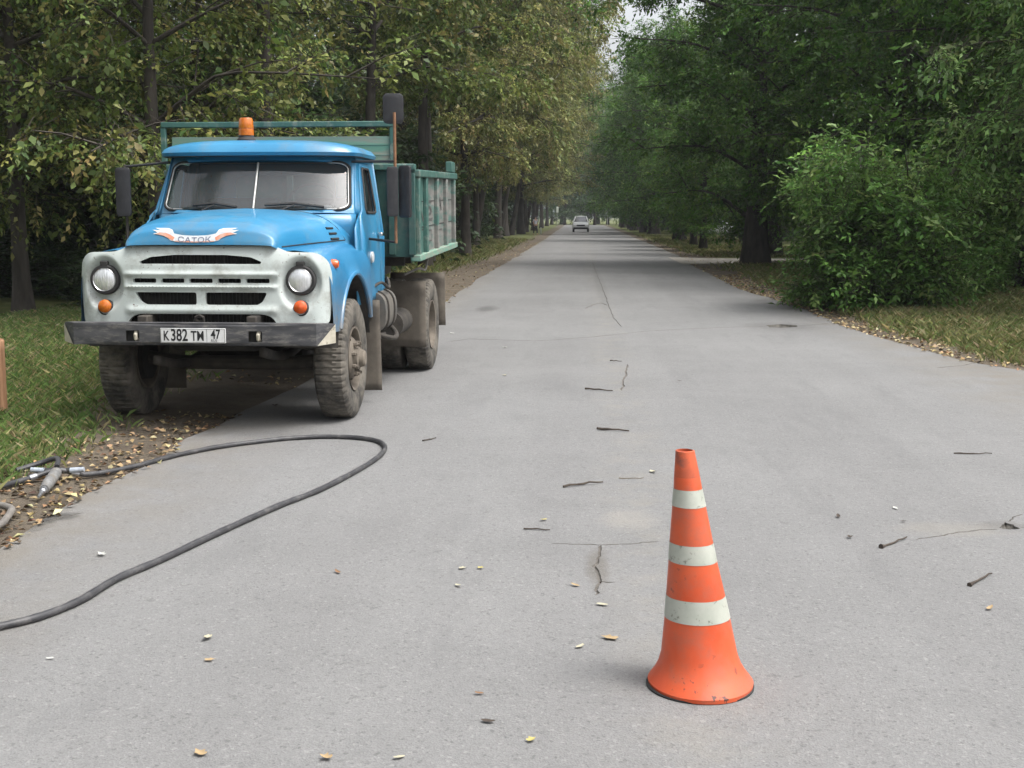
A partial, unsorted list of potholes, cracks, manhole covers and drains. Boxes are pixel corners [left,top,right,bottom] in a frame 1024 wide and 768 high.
crack [916,514,1022,540]
crack [552,541,657,595]
crack [451,264,829,342]
